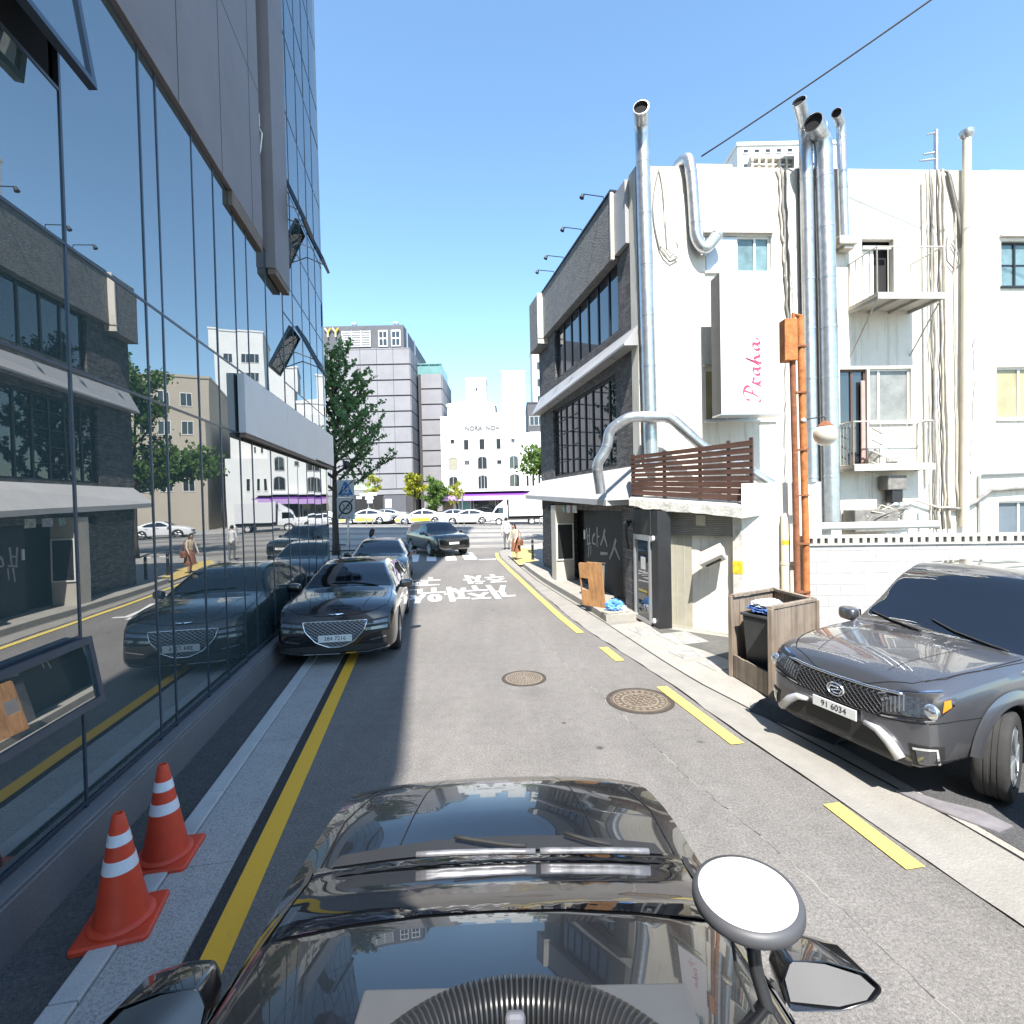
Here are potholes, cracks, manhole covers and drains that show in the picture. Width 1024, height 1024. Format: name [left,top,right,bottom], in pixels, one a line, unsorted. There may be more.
manhole cover [502,670,546,686]
manhole cover [606,688,675,714]
